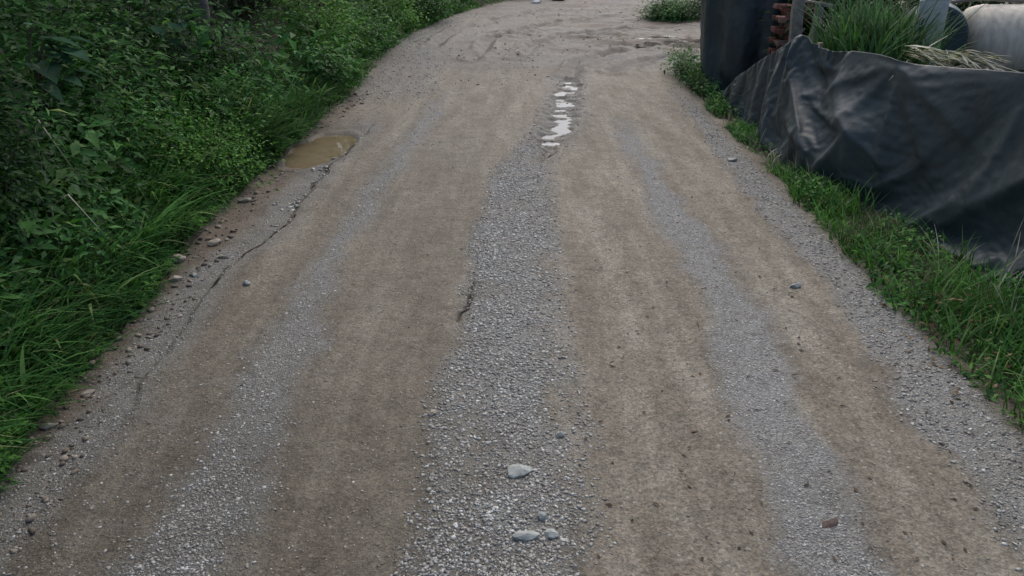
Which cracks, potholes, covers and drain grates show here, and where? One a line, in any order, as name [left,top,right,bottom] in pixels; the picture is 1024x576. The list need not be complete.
pothole [530,75,590,158]
crack [73,145,354,469]
crack [457,281,475,322]
pothole [273,129,366,173]
